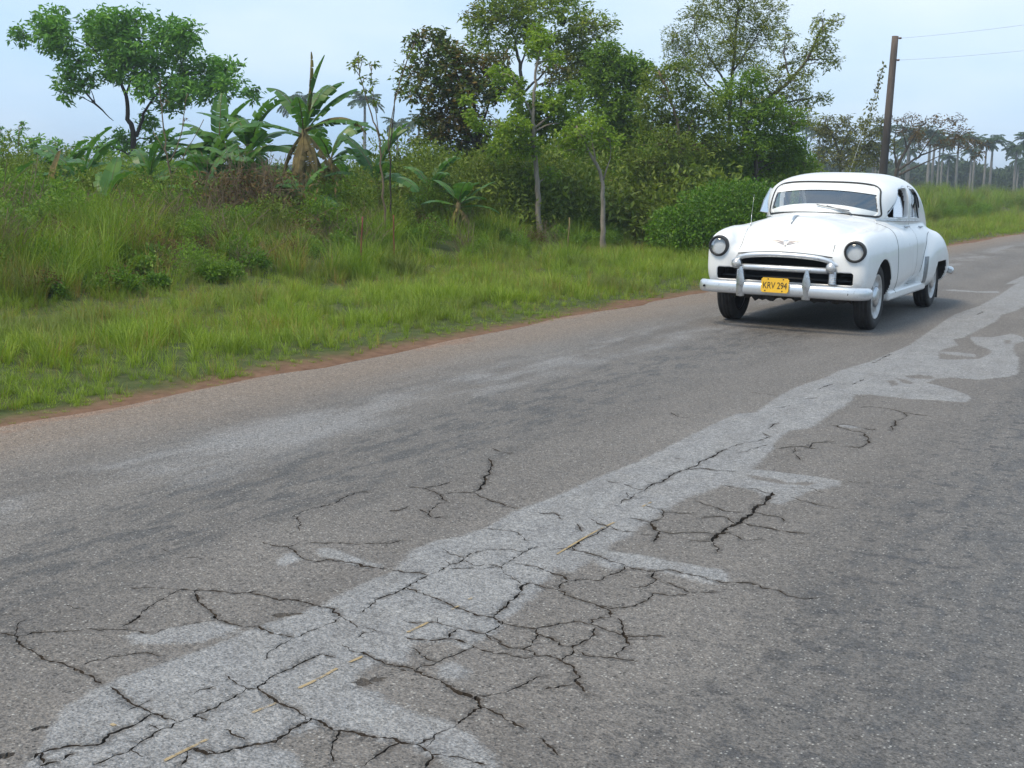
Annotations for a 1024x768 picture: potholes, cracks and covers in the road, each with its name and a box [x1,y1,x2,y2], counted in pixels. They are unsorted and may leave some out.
crack [778,407,931,459]
crack [389,449,518,518]
crack [1,518,814,768]
crack [633,485,831,552]
crack [292,491,365,531]
